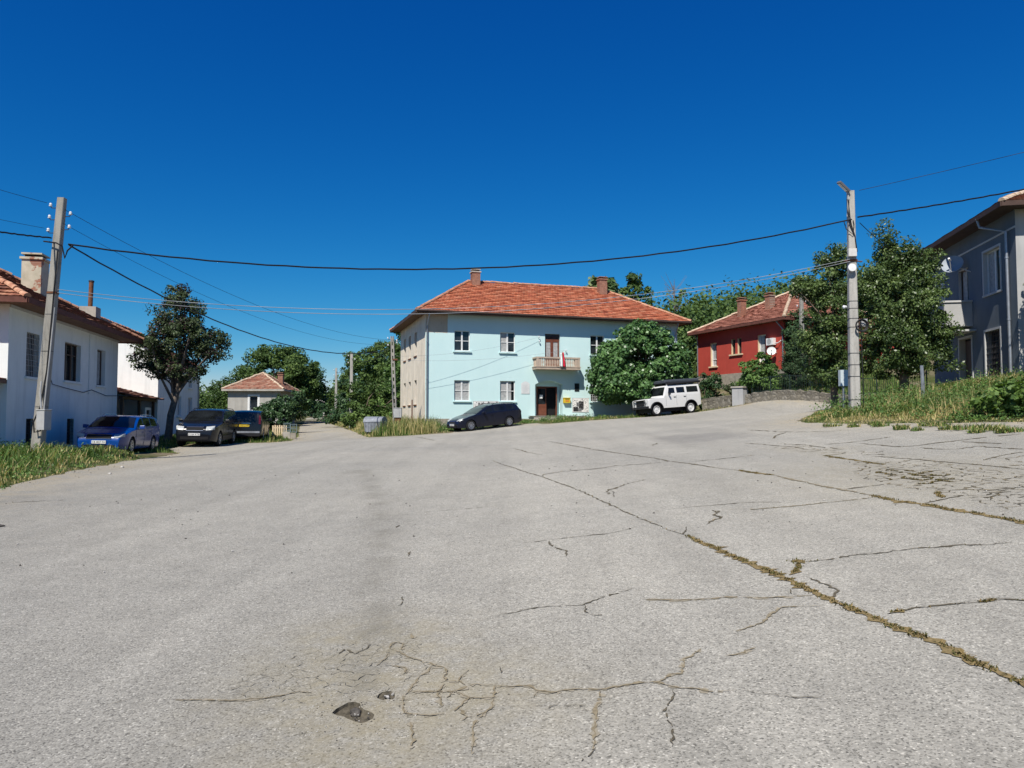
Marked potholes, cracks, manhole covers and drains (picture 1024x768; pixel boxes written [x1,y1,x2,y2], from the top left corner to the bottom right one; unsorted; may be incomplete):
crack [675,430,1024,523]
pothole [377,691,395,700]
crack [542,462,659,496]
crack [110,634,822,761]
pothole [332,702,374,723]
crack [492,542,1007,655]
